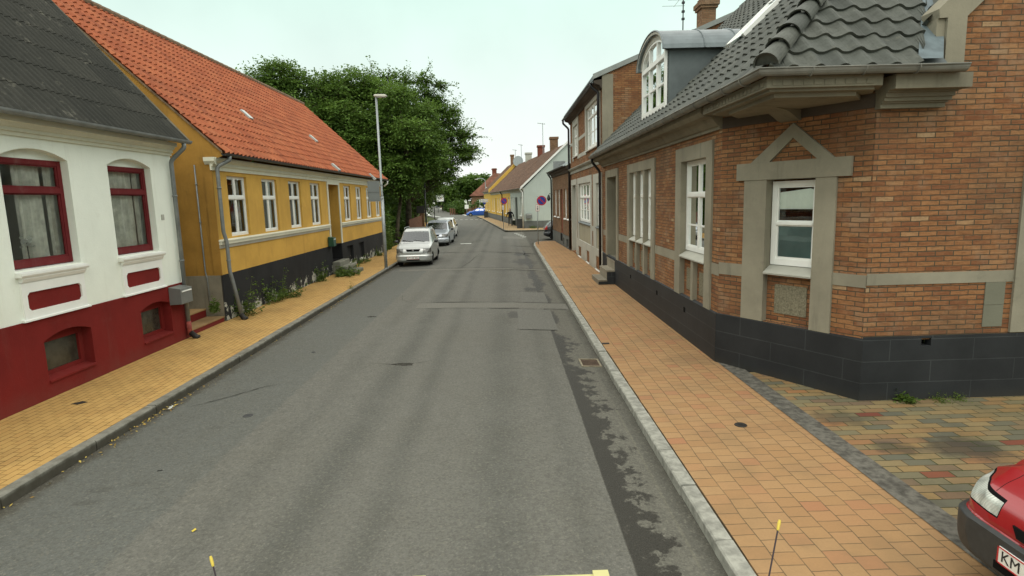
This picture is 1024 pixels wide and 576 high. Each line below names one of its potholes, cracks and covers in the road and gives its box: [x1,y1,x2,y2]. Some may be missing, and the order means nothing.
drain grate [578,359,602,367]
